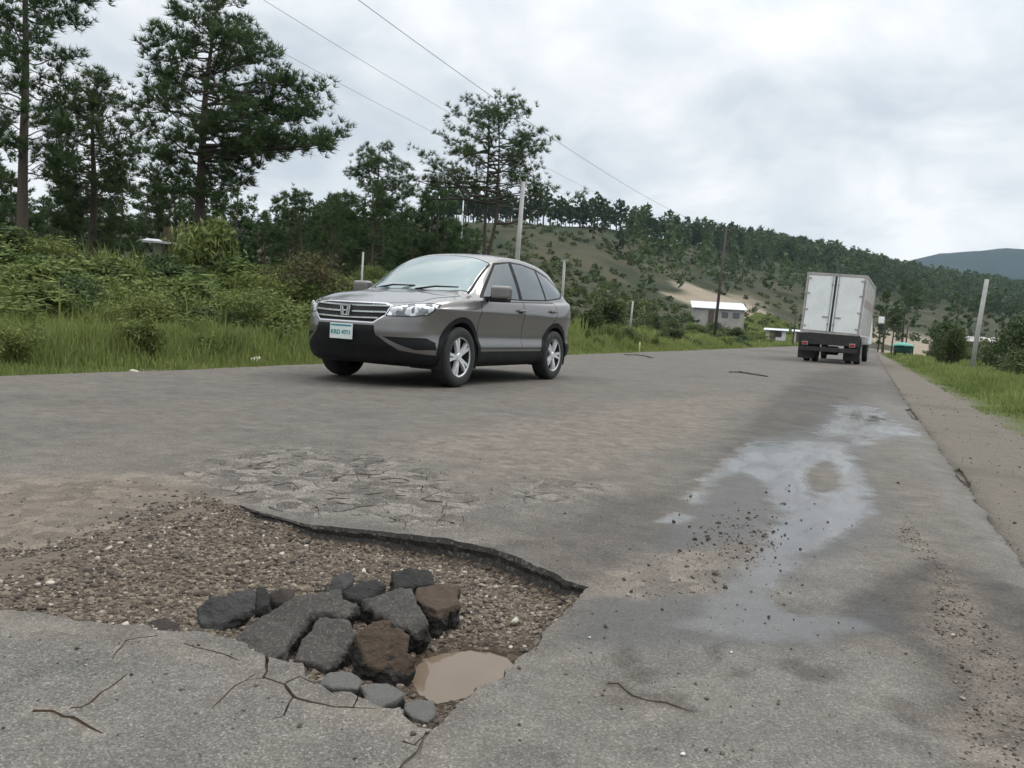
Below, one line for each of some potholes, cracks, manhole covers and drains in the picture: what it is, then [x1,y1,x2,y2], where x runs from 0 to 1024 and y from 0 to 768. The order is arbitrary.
crack [515,477,604,507]
crack [32,635,157,733]
crack [179,452,473,529]
pothole [0,501,589,728]
crack [399,731,430,768]
crack [183,643,376,720]
crack [608,682,692,712]
